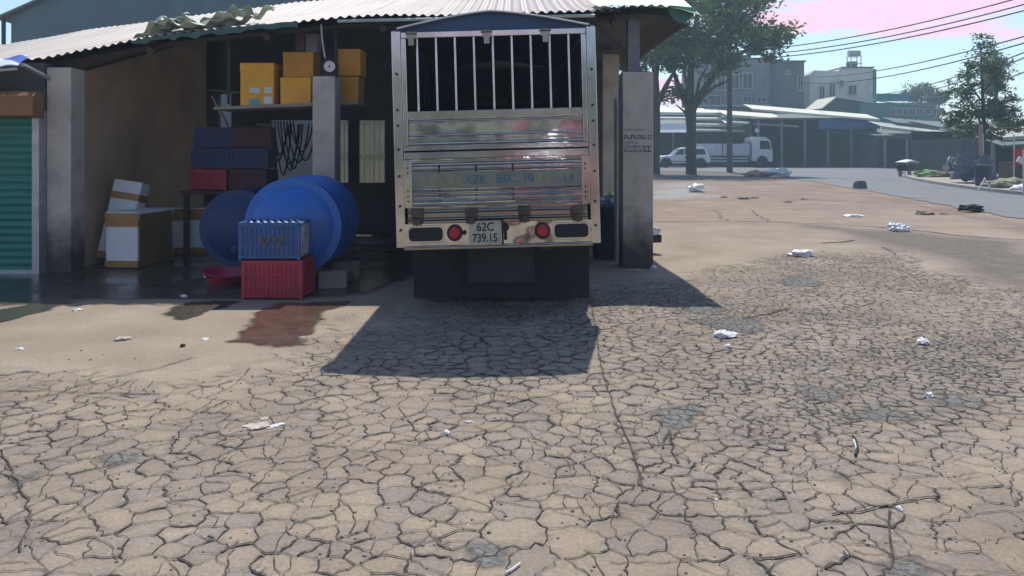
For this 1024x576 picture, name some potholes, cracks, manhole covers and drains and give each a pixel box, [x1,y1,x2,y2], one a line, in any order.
crack [0,247,1024,576]
